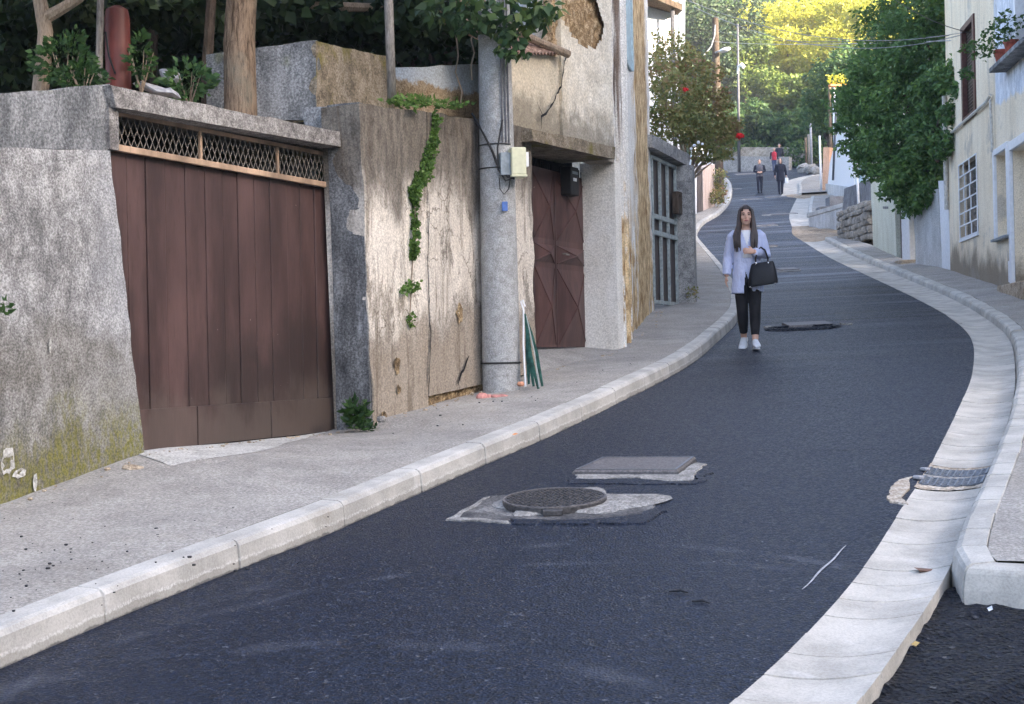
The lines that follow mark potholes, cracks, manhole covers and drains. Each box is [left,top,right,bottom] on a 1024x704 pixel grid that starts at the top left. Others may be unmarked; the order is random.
drain grate [887,463,990,505]
manhole cover [445,487,673,526]
manhole cover [567,456,714,485]
